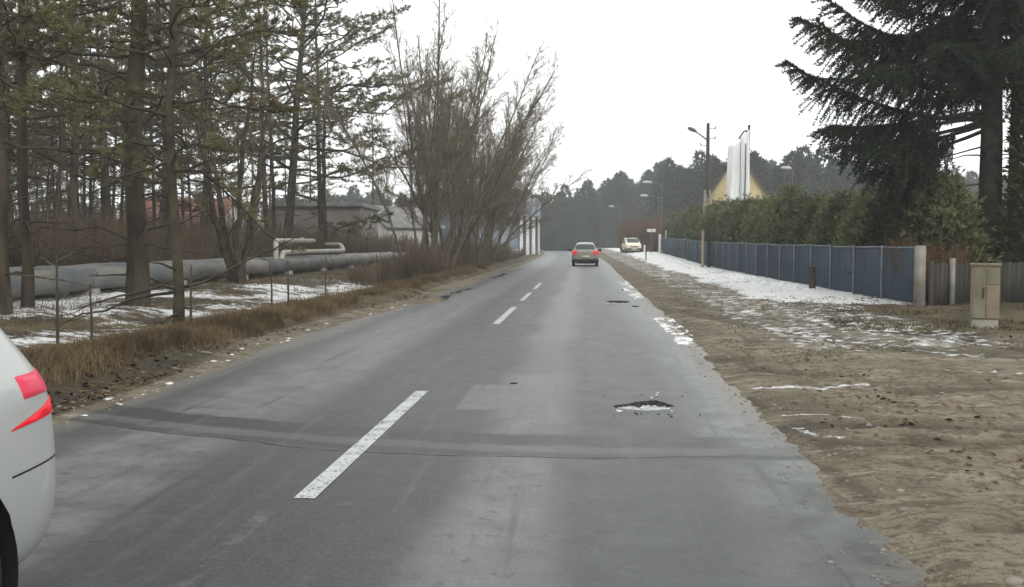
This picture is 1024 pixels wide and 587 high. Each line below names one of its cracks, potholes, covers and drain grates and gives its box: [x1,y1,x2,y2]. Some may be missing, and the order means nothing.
pothole [604,392,700,417]
